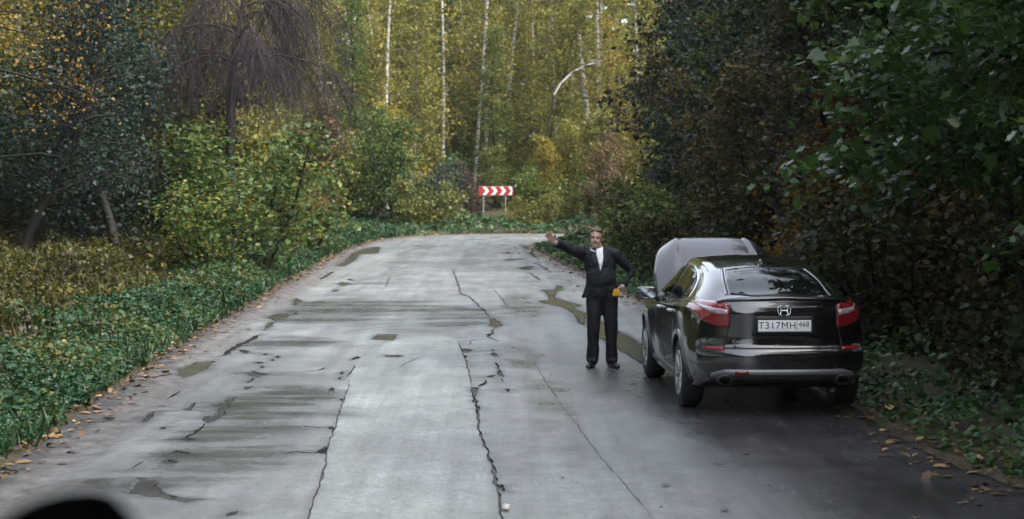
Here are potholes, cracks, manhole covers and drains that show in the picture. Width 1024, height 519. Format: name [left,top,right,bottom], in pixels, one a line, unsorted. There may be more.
crack [286,365,355,519]
crack [452,269,508,519]
